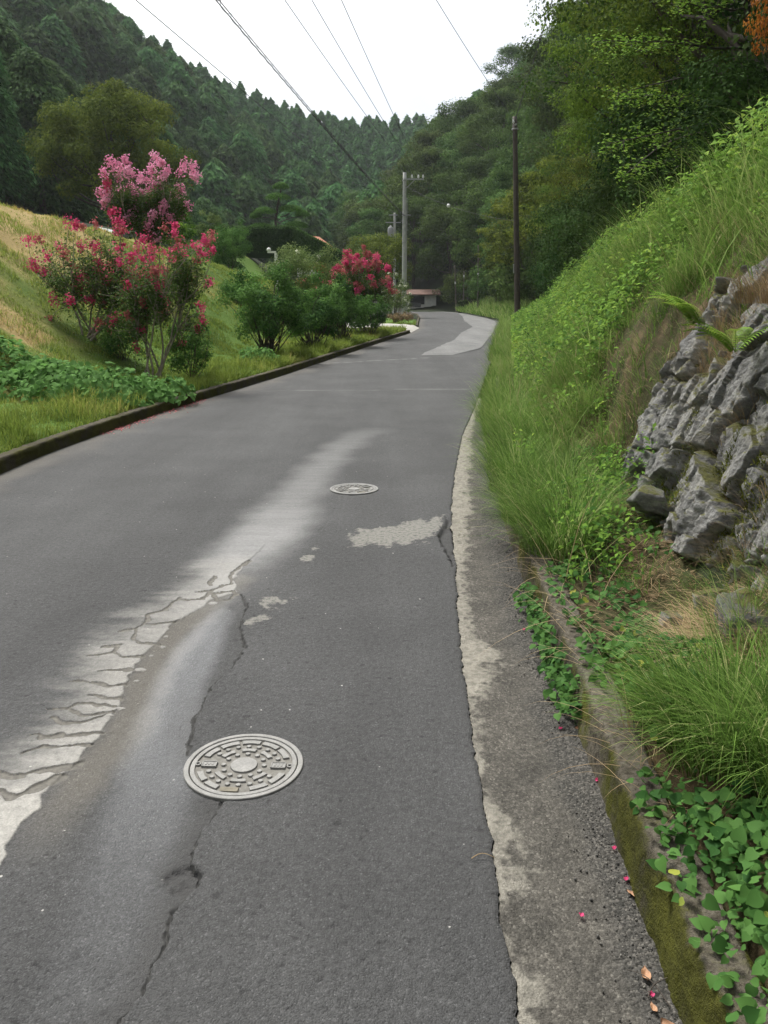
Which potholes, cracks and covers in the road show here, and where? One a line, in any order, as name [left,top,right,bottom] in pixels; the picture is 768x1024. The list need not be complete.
manhole cover [330,483,378,496]
manhole cover [183,734,303,803]
pothole [162,865,200,898]
crack [0,560,252,801]
crack [116,801,223,1024]
